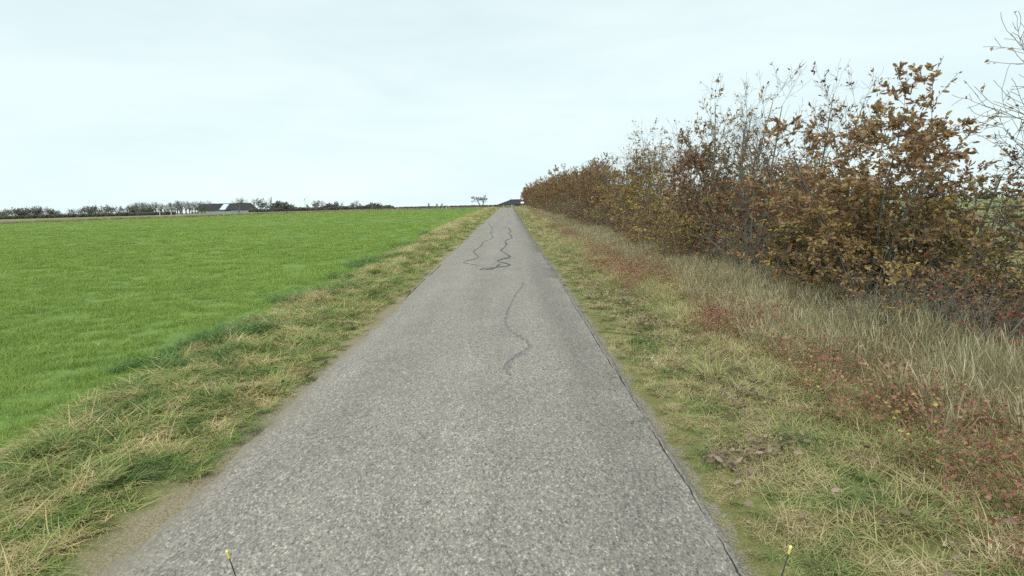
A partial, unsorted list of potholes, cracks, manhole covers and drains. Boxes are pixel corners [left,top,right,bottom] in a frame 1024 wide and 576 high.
crack [463,223,532,376]
